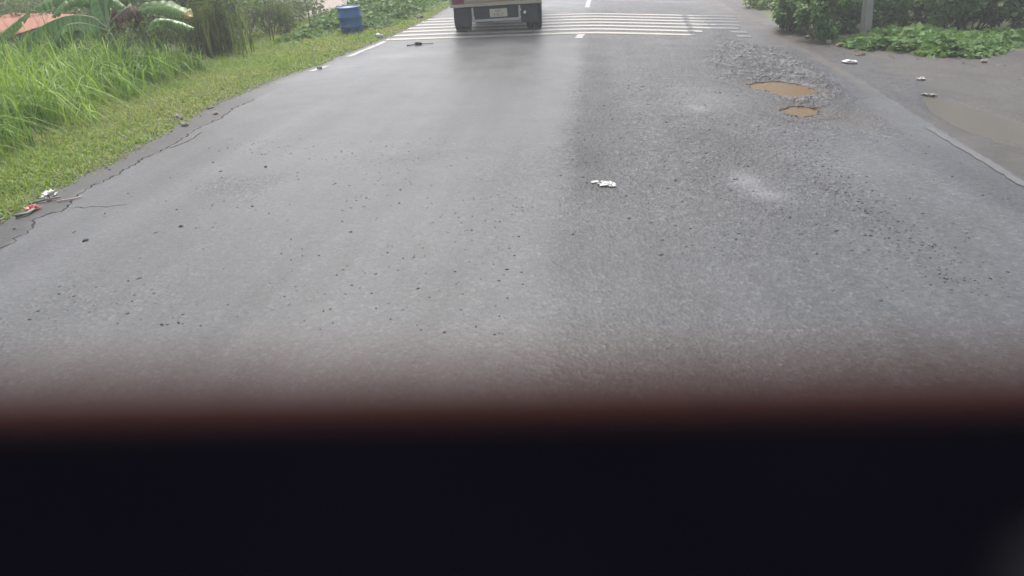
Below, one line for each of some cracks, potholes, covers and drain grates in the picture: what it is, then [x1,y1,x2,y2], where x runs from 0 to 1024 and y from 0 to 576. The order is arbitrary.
pothole [741,81,821,97]
pothole [777,105,823,117]
crack [0,99,254,249]
